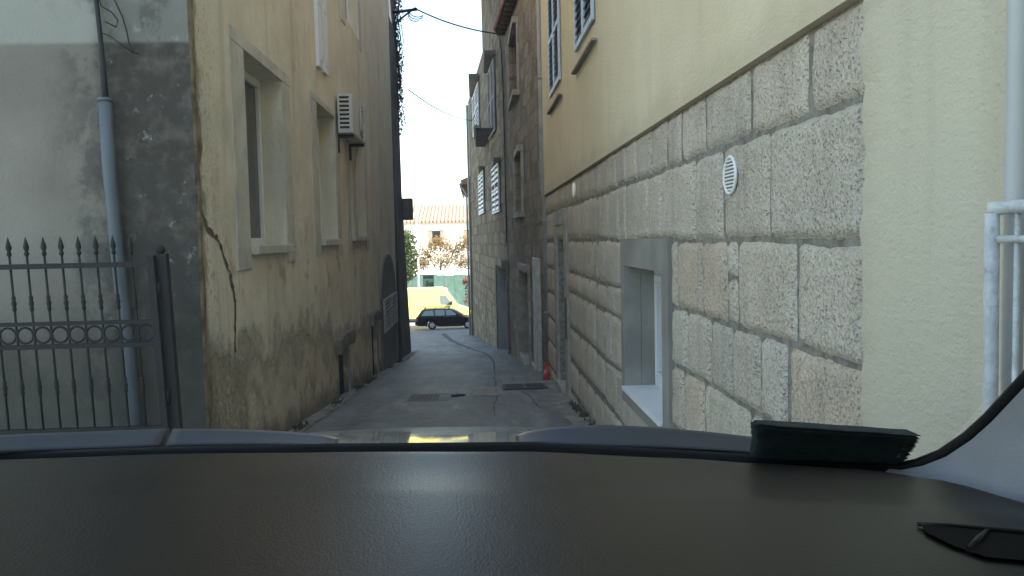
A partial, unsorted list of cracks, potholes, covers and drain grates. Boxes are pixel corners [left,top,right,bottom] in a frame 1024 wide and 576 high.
crack [441,333,541,416]
